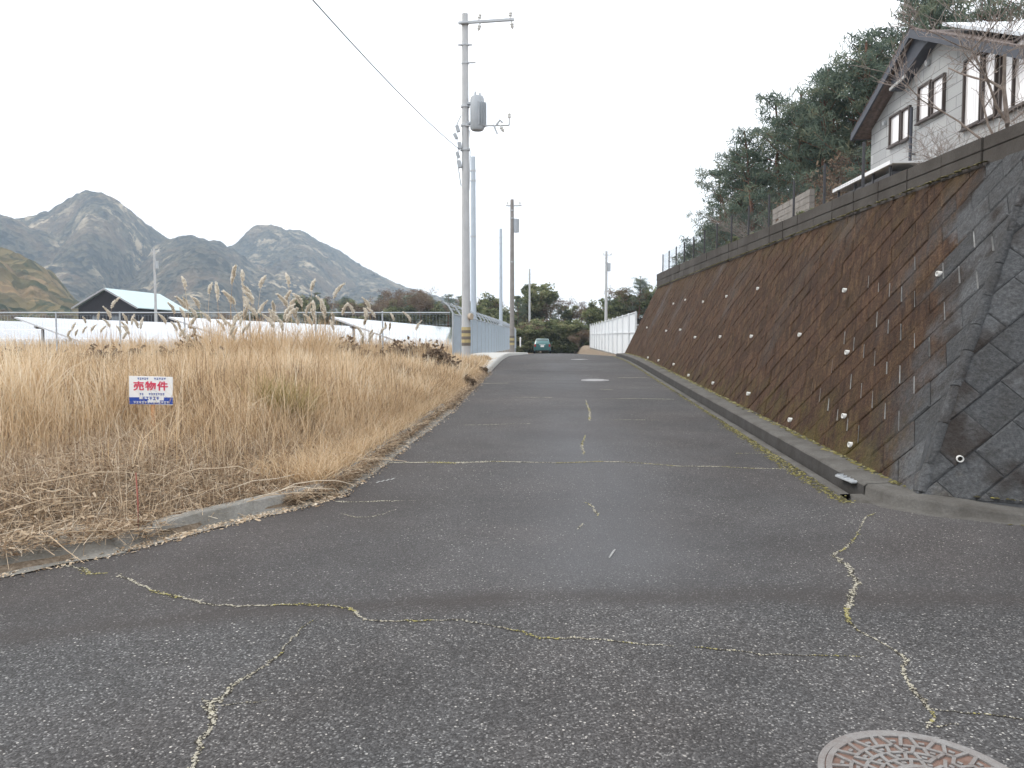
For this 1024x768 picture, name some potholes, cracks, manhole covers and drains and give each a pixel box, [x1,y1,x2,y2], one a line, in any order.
crack [58,512,1024,768]
crack [387,389,778,469]
crack [336,500,414,518]
manhole cover [818,730,1008,768]
